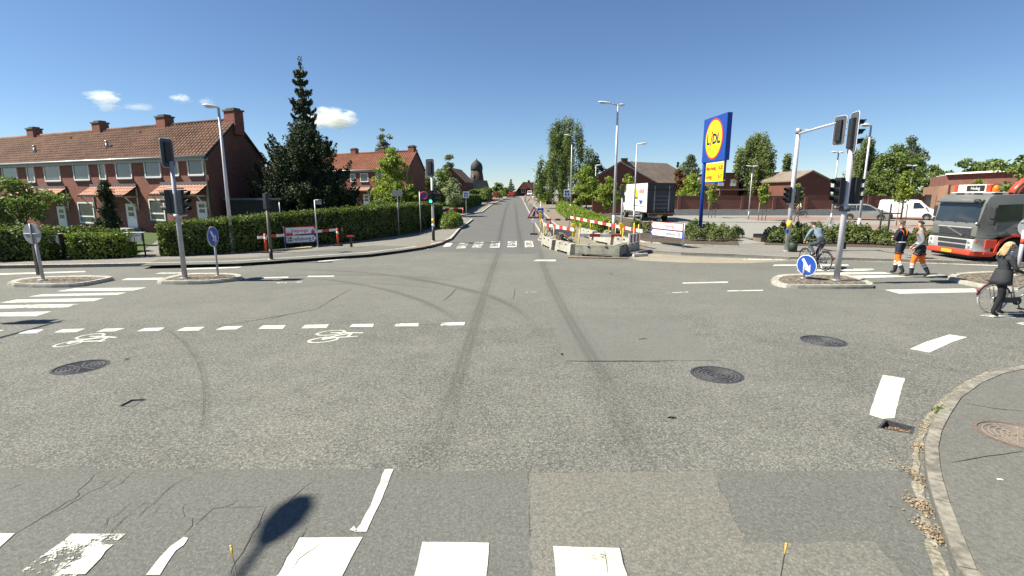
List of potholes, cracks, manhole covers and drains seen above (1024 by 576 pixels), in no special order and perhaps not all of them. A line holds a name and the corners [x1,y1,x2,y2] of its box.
crack [13,473,307,572]
manhole cover [690,366,745,384]
manhole cover [800,335,848,347]
manhole cover [49,359,111,375]
manhole cover [972,420,1024,449]
